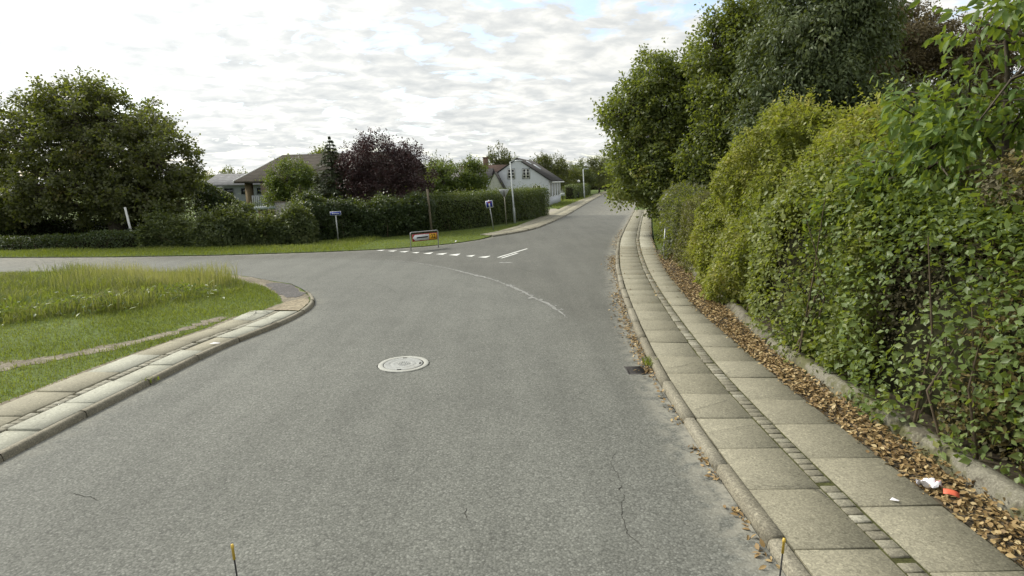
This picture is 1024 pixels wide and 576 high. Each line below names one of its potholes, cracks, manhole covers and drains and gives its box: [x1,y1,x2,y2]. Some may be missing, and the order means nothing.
manhole cover [377,356,430,373]
drain grate [624,366,648,375]
